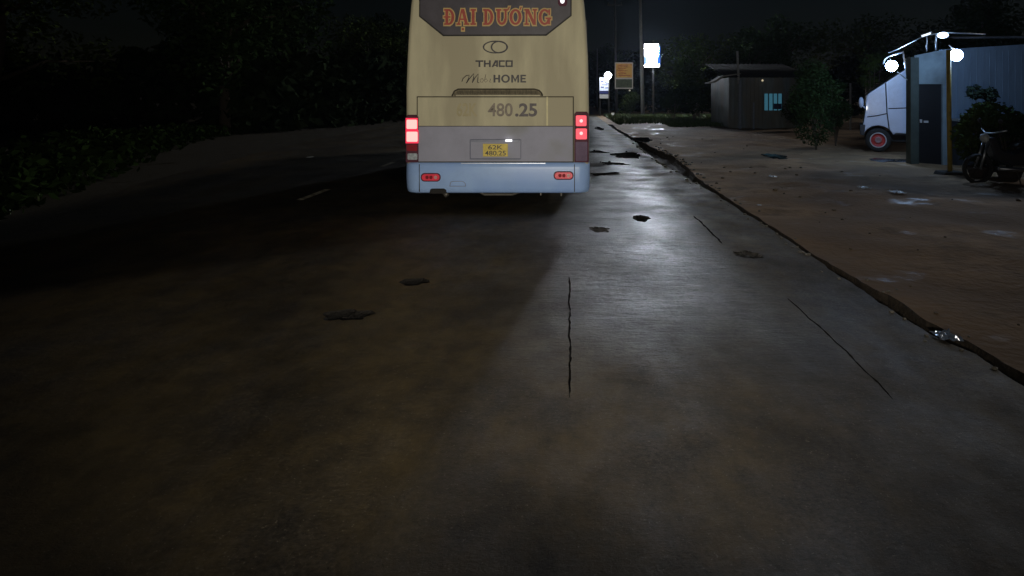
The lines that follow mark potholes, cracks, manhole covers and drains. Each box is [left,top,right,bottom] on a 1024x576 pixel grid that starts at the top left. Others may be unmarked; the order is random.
pothole [733,250,764,259]
pothole [323,309,376,321]
pothole [399,278,430,286]
crack [608,124,1024,398]
pothole [610,151,640,159]
